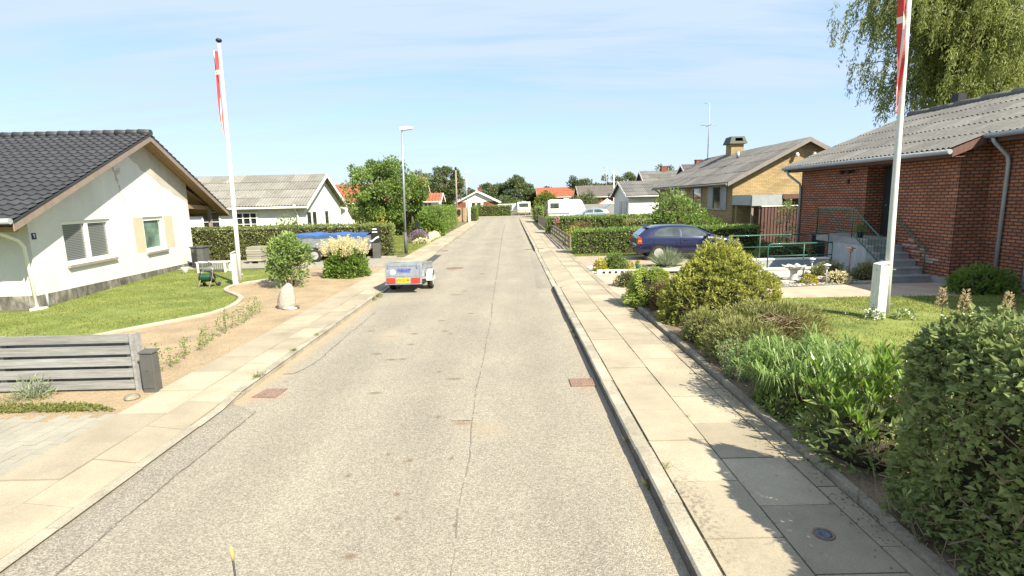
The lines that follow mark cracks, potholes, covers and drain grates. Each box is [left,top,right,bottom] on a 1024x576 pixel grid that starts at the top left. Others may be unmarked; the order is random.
utility cover [812,527,836,541]
